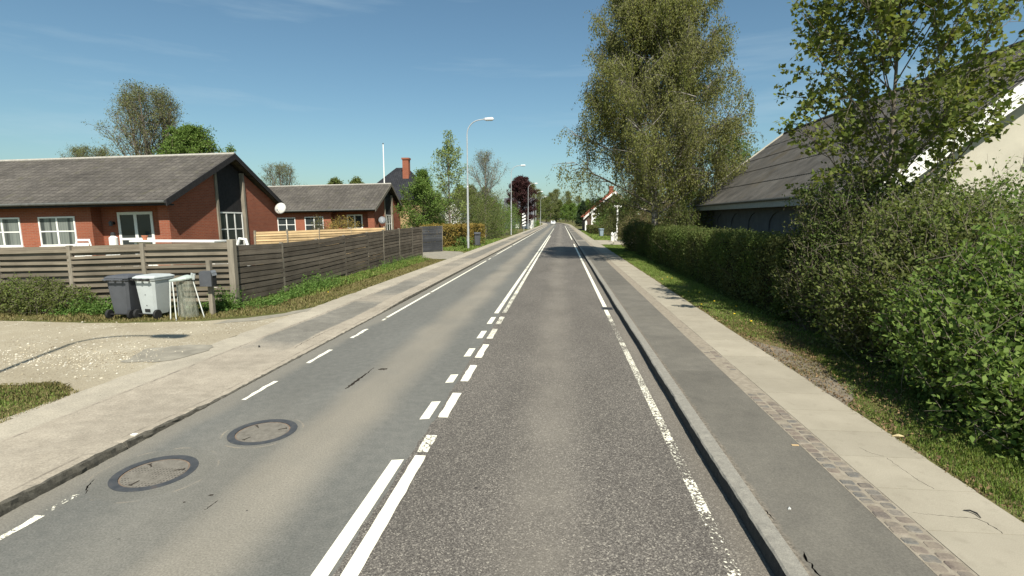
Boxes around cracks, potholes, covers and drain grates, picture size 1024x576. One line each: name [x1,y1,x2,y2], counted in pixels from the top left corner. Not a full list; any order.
crack [803,551,821,576]
manhole cover [227,419,298,446]
manhole cover [108,455,199,492]
